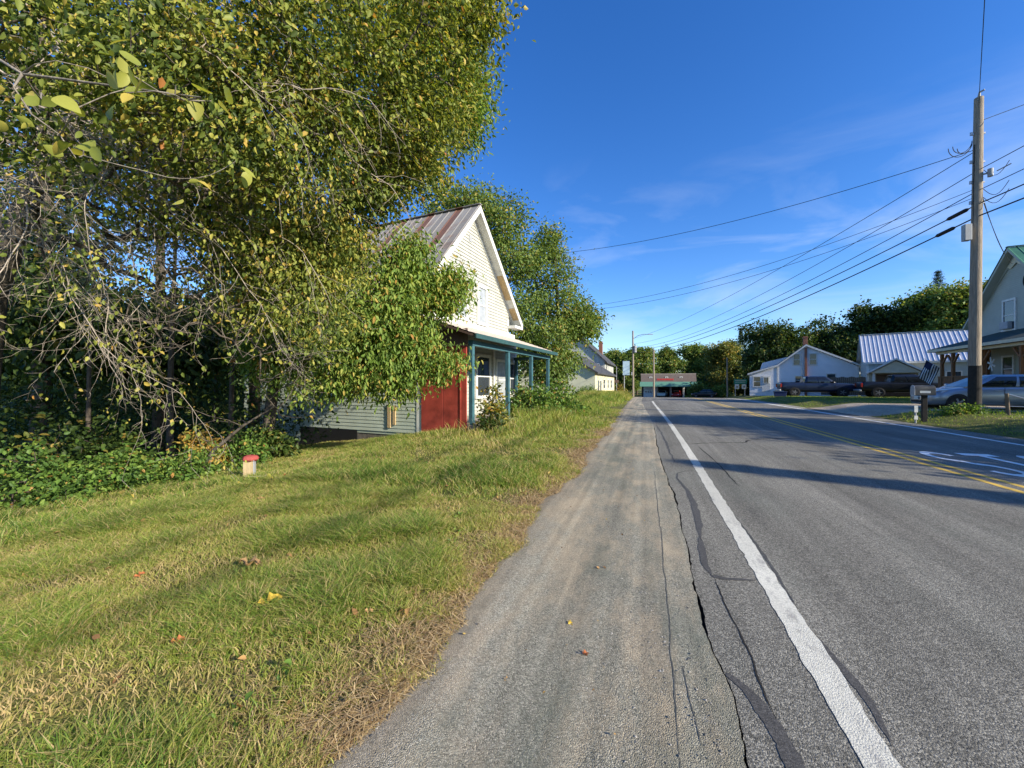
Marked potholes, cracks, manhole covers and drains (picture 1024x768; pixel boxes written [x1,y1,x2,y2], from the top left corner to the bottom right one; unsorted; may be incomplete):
crack [654,428,776,768]
